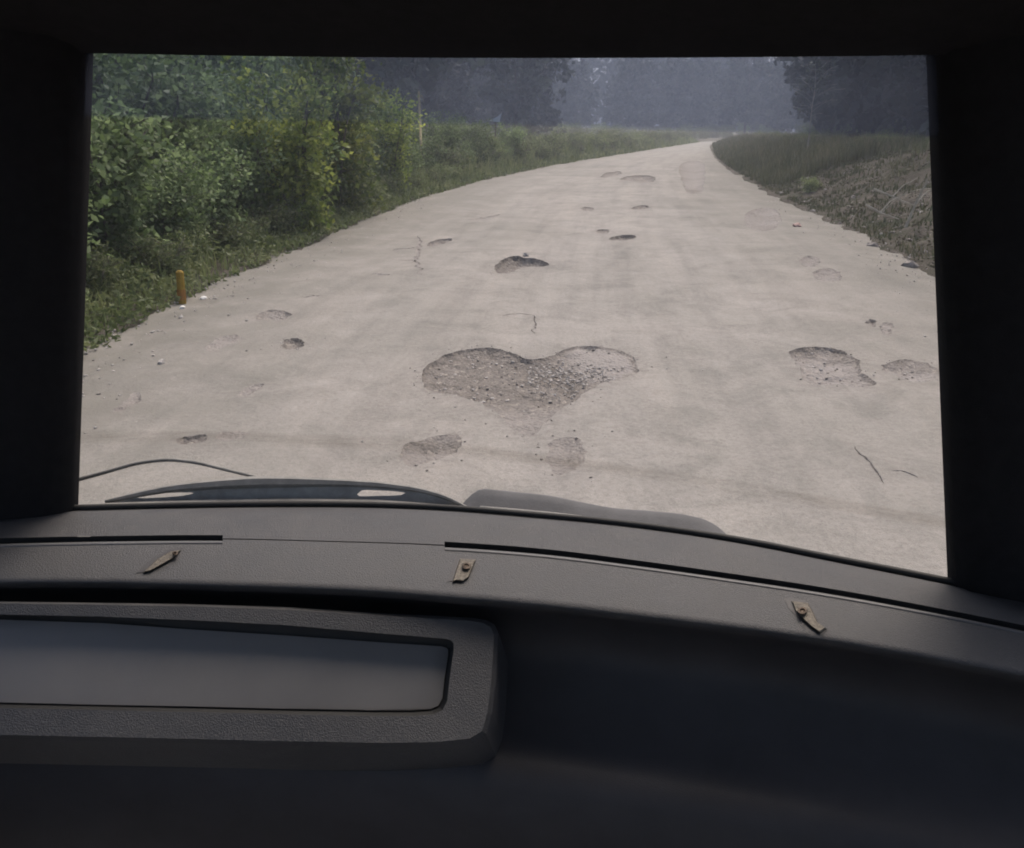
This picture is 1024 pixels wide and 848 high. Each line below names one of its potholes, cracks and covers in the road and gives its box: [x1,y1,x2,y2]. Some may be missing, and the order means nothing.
pothole [176,434,208,445]
pothole [881,359,939,382]
pothole [399,434,462,466]
crack [374,236,423,275]
pothole [545,437,588,475]
pothole [621,175,656,183]
pothole [427,238,452,247]
pothole [494,256,549,273]
pothole [280,338,305,350]
pothole [422,346,640,435]
pothole [812,268,842,281]
crack [852,444,917,482]
